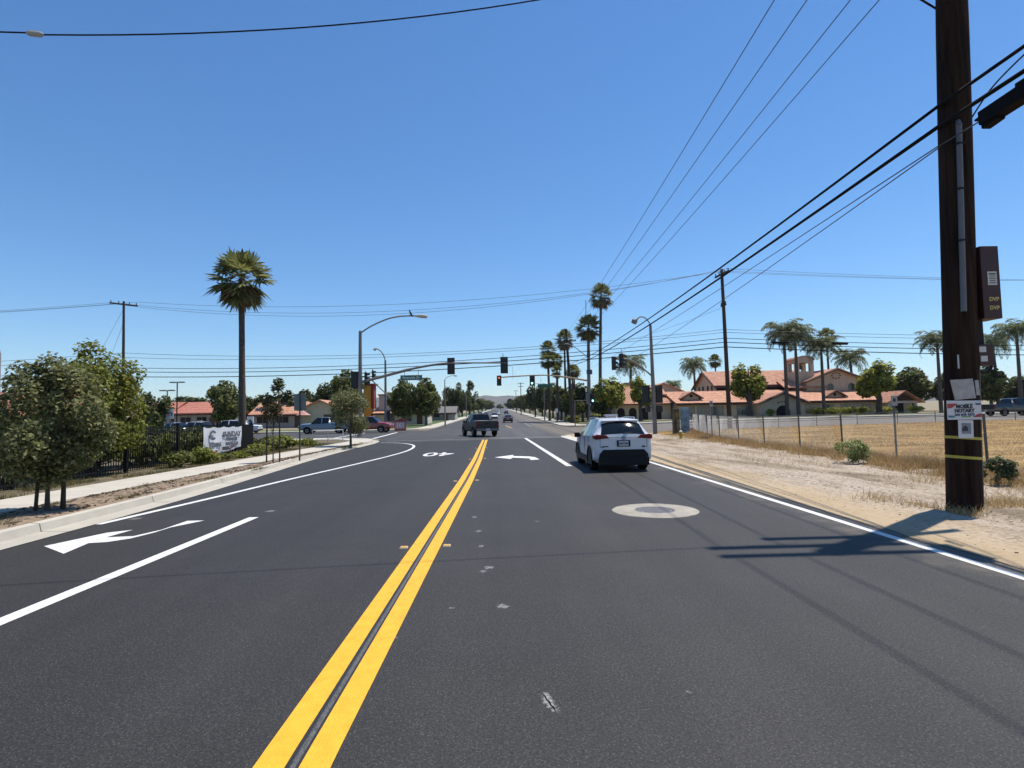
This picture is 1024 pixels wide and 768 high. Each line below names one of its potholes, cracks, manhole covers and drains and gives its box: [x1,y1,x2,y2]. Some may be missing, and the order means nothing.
manhole cover [612,503,699,518]
